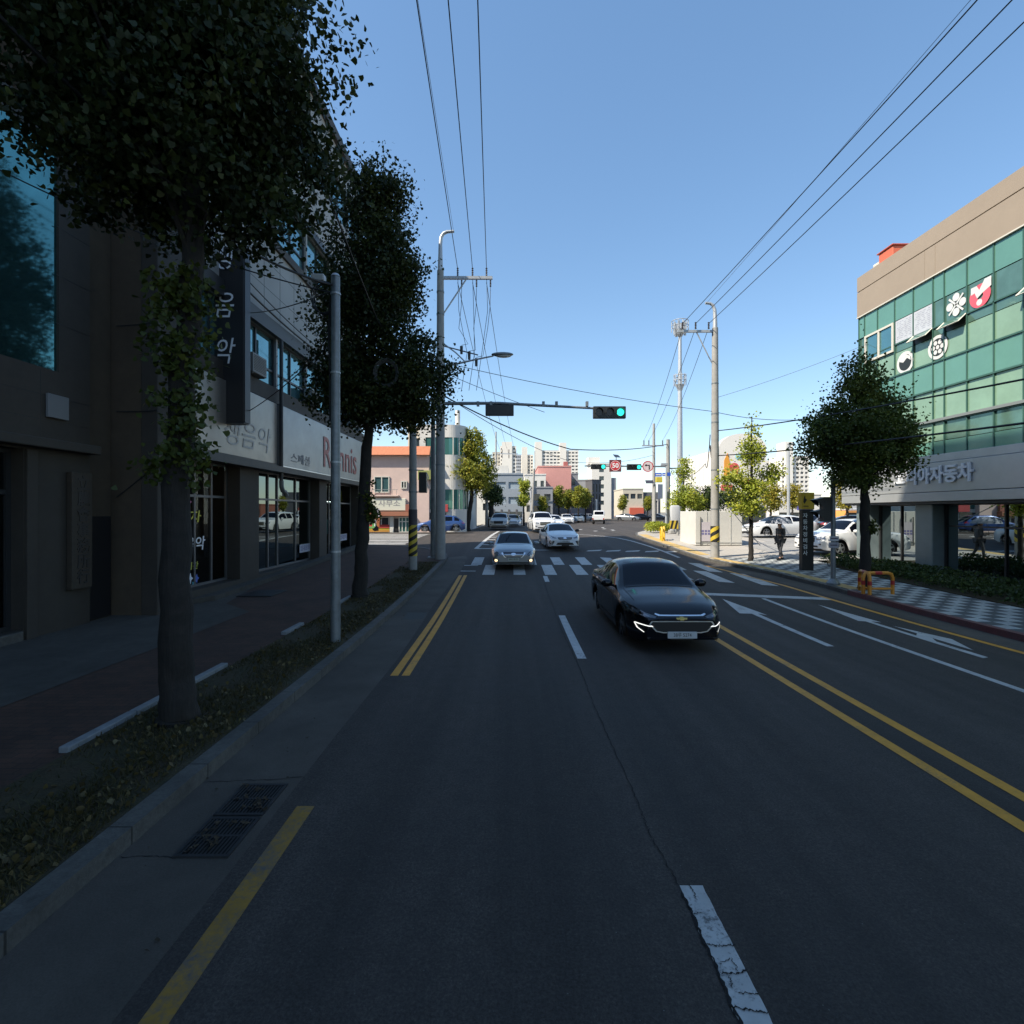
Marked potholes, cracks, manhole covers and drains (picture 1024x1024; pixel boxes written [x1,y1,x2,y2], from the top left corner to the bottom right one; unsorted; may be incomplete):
drain grate [172,817,261,858]
drain grate [213,783,288,816]
